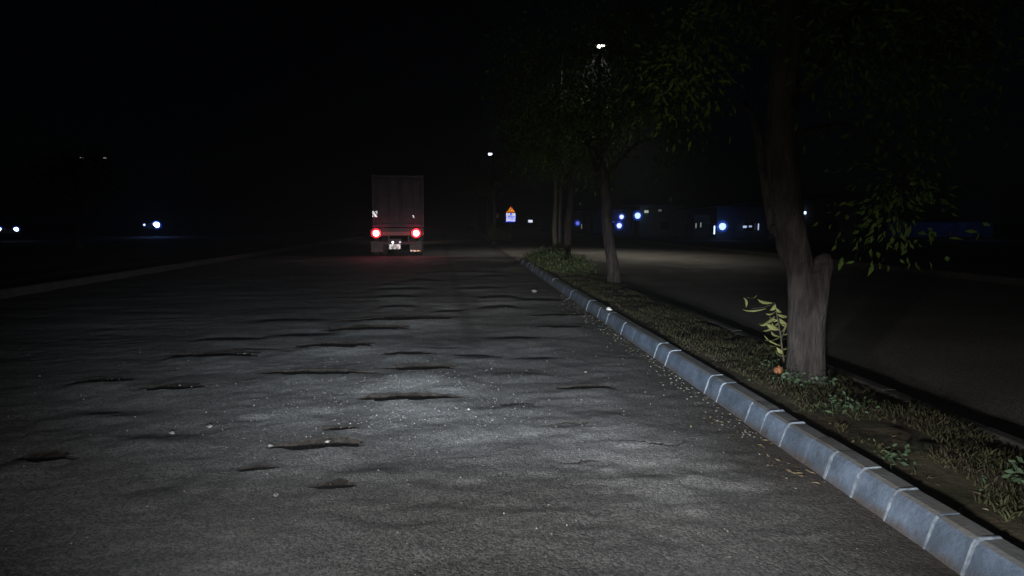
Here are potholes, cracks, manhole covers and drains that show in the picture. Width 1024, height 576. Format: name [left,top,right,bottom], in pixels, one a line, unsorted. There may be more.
pothole [12,451,79,463]
pothole [357,392,466,401]
pothole [139,383,205,391]
pothole [266,436,365,450]
pothole [308,479,359,489]
